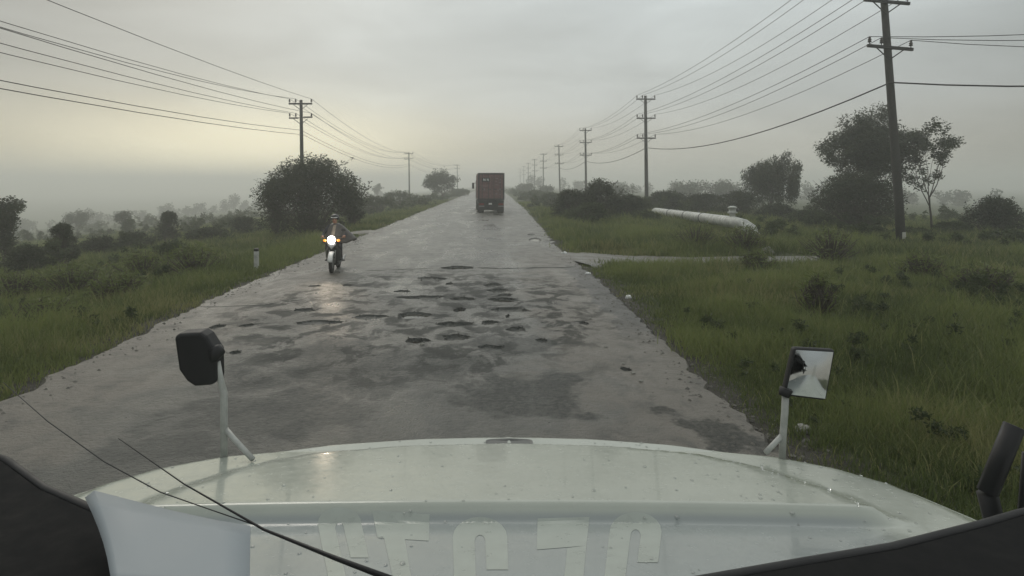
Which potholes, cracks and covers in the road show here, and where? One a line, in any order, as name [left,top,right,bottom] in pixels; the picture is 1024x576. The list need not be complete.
pothole [397,311,434,319]
pothole [442,332,470,341]
